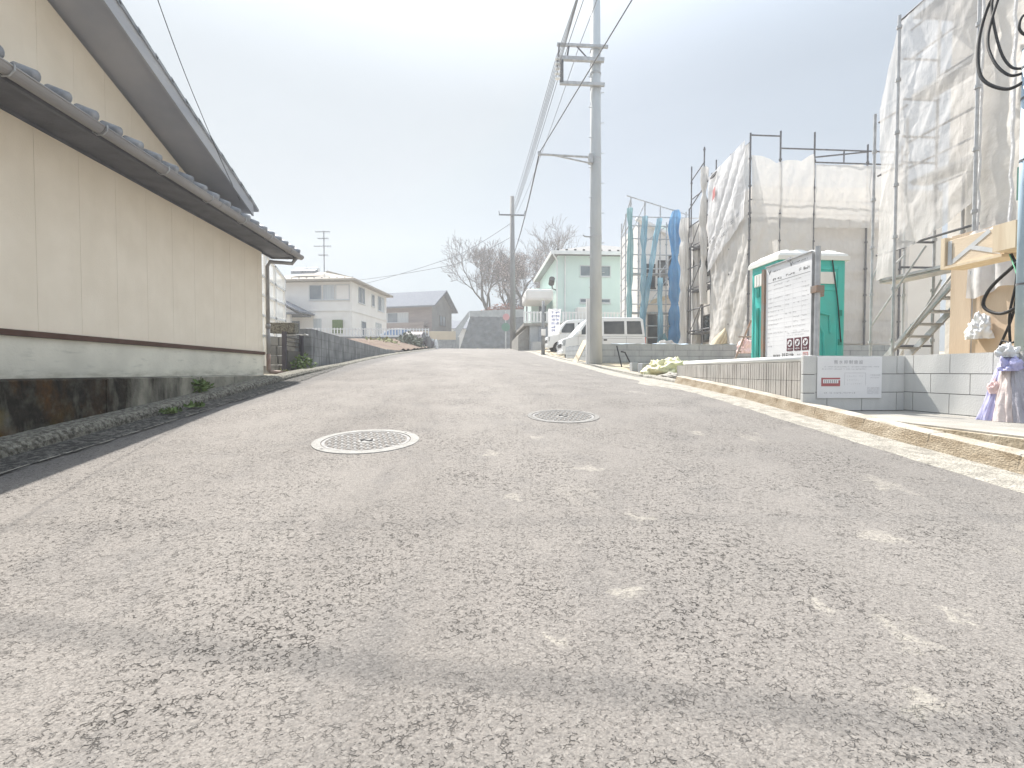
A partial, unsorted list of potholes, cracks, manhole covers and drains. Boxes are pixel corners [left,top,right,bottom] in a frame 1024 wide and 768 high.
manhole cover [311,429,419,454]
manhole cover [527,410,600,423]
